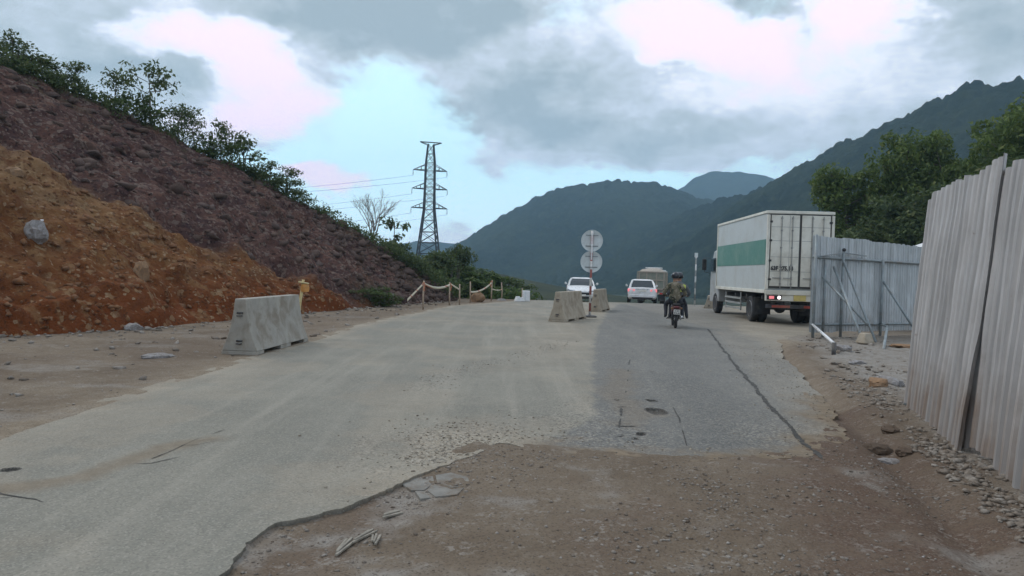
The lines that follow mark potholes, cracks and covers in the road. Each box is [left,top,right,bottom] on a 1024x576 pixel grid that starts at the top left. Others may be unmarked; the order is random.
crack [615,351,633,437]
